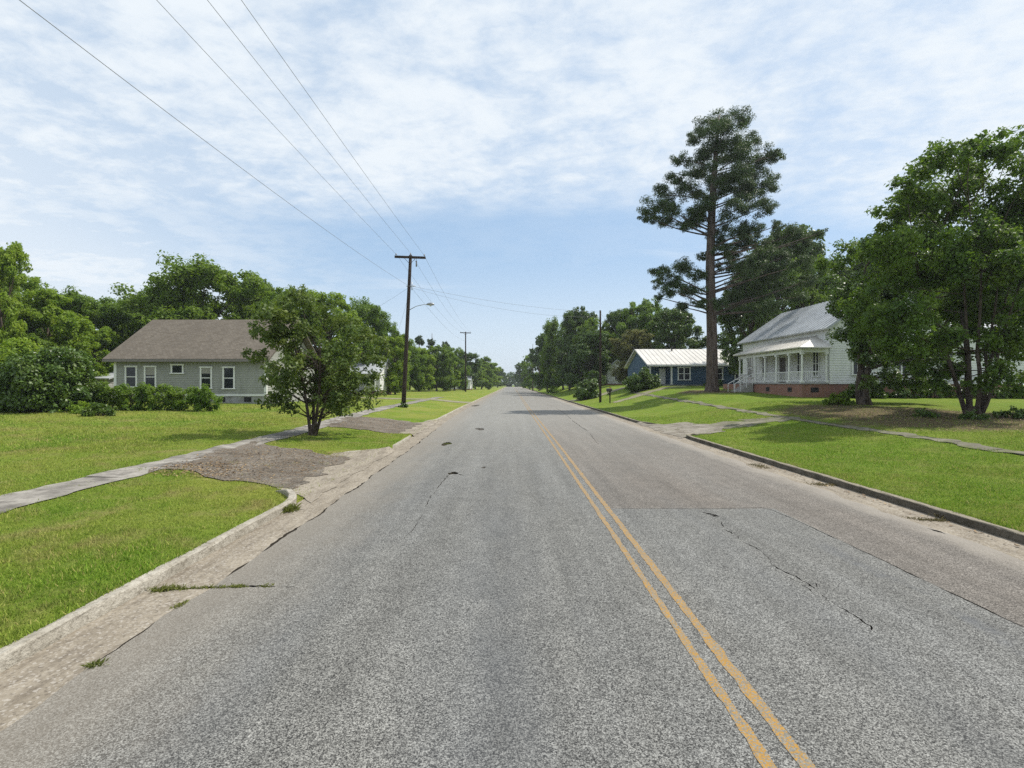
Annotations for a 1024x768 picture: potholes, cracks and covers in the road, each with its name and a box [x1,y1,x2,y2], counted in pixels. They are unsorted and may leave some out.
crack [703,512,876,633]
